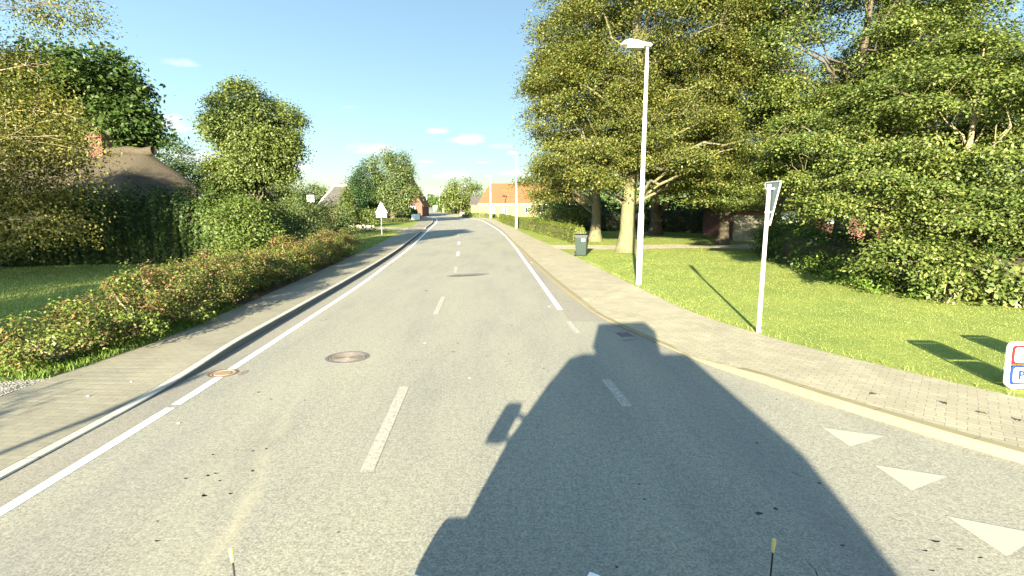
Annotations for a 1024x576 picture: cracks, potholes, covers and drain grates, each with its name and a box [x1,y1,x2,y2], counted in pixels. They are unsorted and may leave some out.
manhole cover [325,351,370,364]
manhole cover [207,369,239,378]
